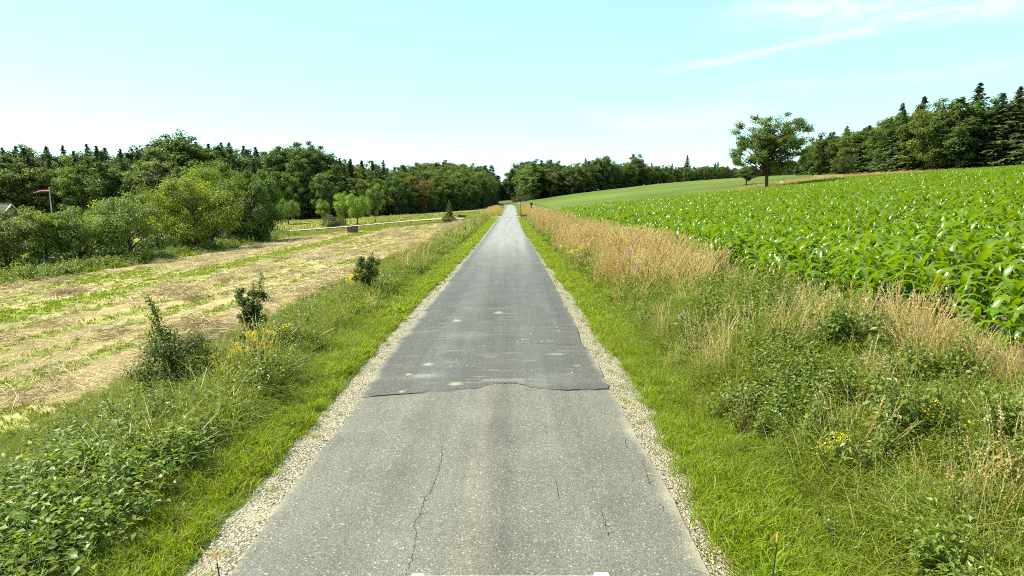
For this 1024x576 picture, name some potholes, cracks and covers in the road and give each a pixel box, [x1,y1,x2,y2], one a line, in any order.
crack [405,449,443,576]
